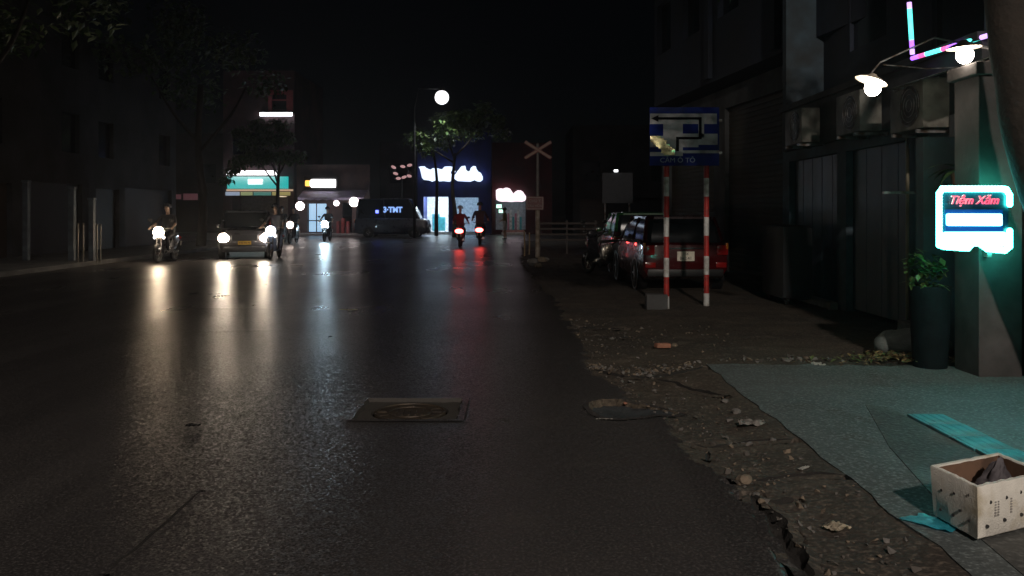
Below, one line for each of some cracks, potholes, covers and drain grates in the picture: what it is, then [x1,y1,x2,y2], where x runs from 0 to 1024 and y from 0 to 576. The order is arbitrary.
crack [98,492,205,575]
pothole [583,398,686,420]
crack [588,366,730,398]
crack [690,437,846,576]
manhole cover [344,397,469,421]
